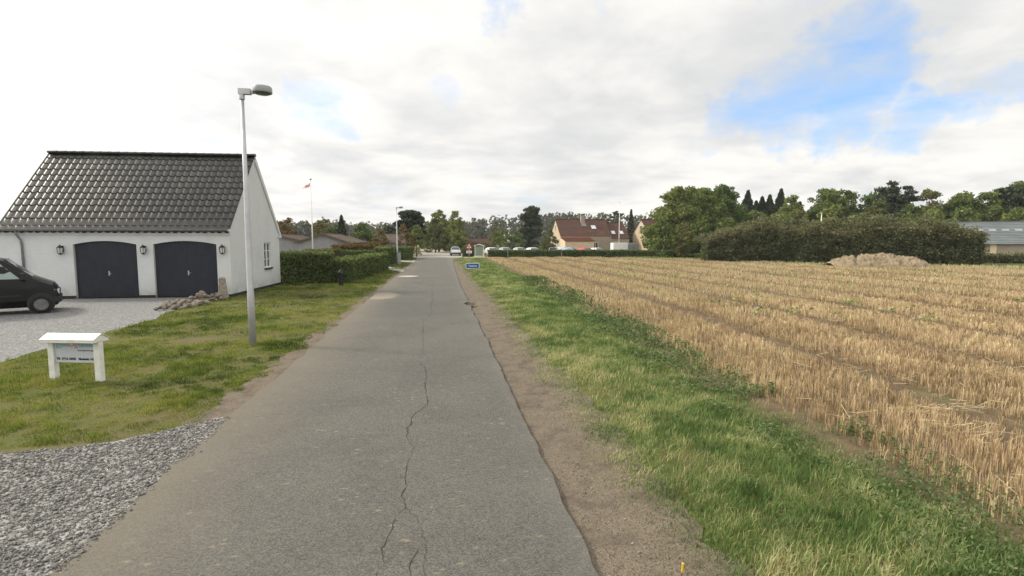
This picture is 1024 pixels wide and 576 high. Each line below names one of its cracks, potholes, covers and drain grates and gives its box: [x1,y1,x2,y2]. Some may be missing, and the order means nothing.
crack [376,294,437,575]
